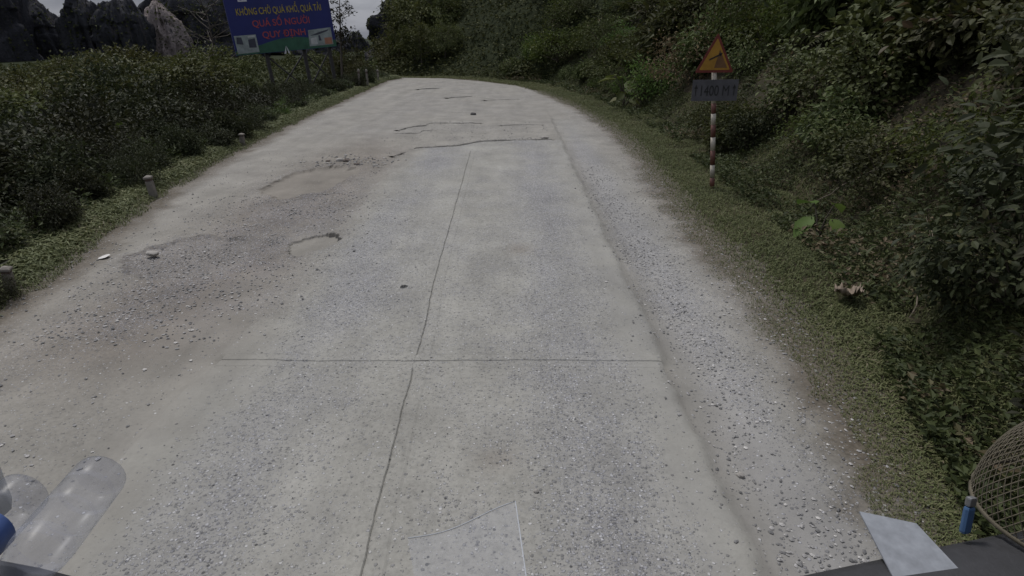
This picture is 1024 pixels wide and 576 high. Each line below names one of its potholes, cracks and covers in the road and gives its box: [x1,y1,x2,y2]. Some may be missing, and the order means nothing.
crack [415,88,517,101]
crack [390,122,553,158]
pothole [274,229,355,262]
pothole [246,162,369,205]
